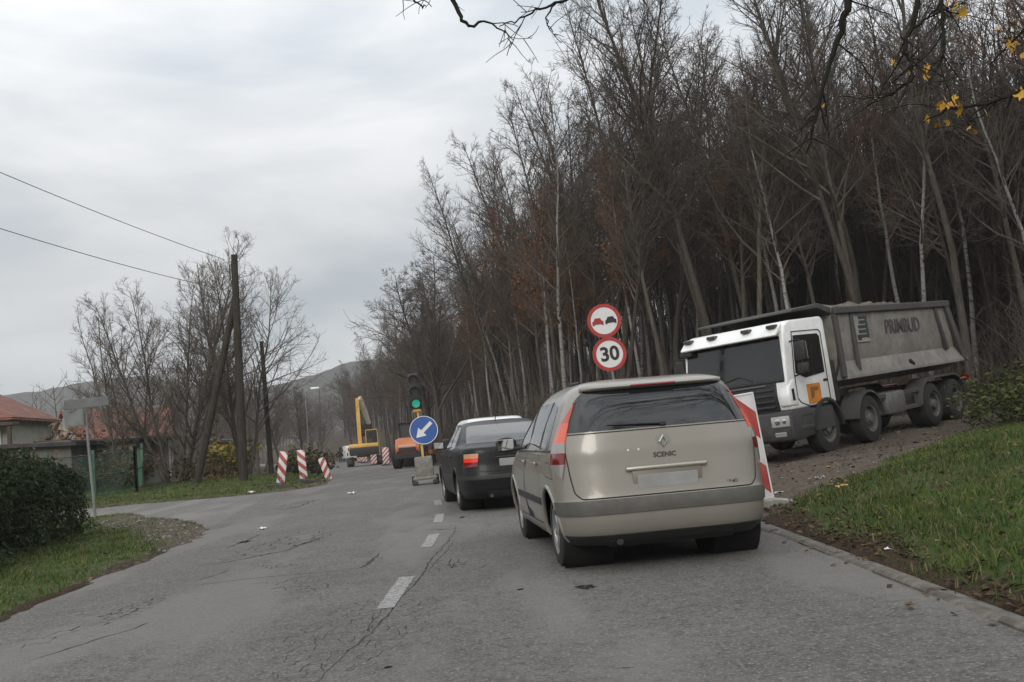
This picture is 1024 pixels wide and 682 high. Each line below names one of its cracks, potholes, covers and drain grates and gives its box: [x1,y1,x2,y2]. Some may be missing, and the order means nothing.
crack [21,596,166,661]
crack [272,527,485,682]
